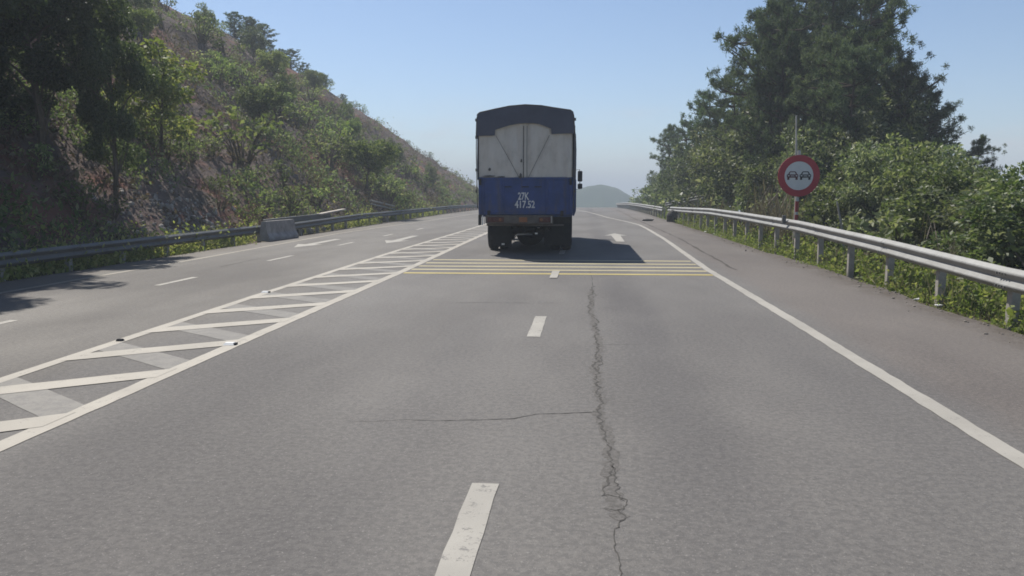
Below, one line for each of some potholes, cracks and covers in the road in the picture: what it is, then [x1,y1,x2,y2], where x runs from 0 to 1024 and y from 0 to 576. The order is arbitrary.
crack [381,269,630,576]
